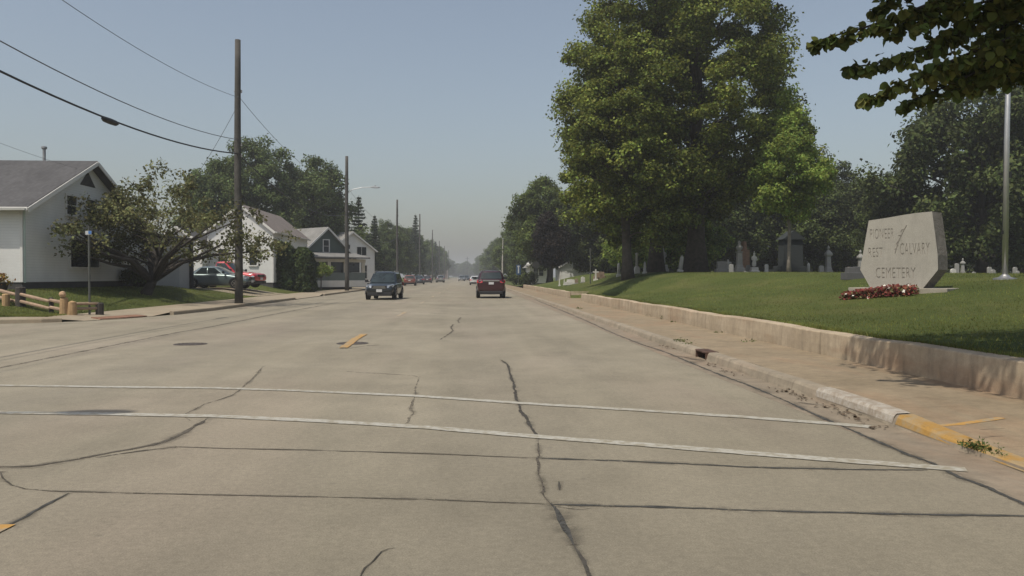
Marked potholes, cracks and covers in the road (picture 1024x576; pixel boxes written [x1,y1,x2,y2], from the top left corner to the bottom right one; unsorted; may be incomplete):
crack [185,367,263,414]
drain grate [695,349,719,360]
crack [348,371,418,423]
crack [501,360,592,576]
